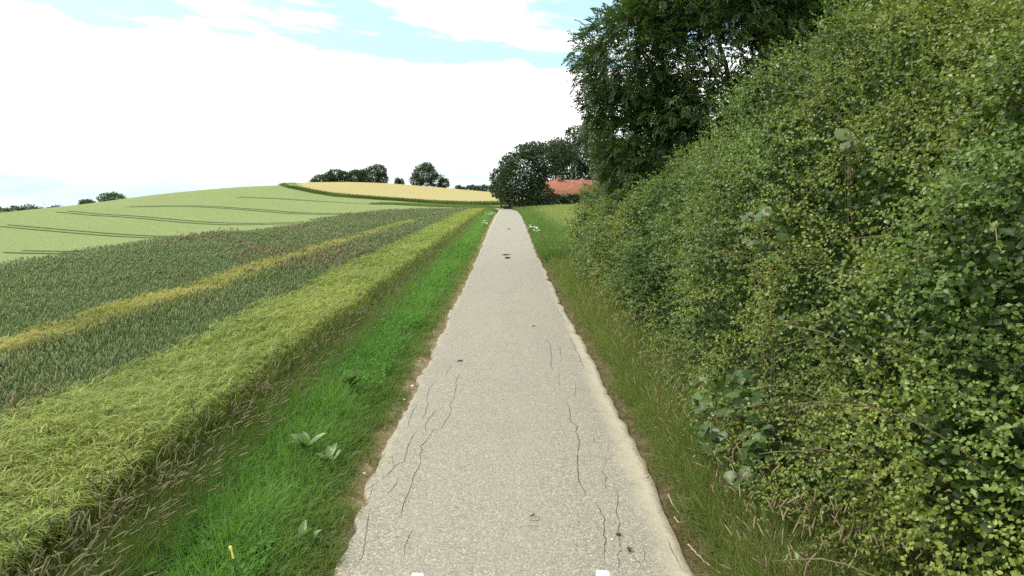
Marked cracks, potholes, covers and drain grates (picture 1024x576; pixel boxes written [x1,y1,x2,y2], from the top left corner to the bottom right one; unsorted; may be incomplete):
crack [358,366,458,563]
crack [565,386,645,571]
